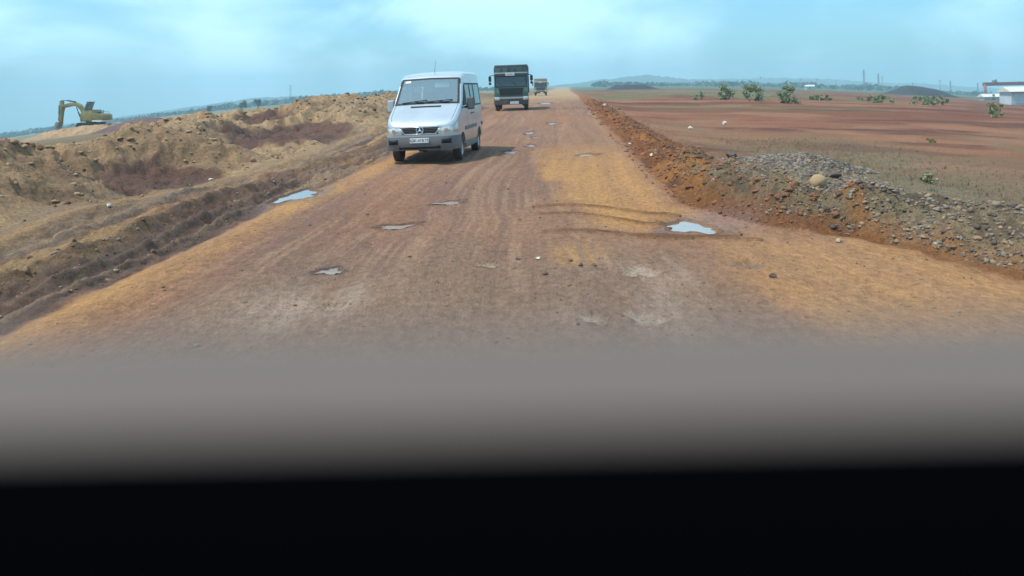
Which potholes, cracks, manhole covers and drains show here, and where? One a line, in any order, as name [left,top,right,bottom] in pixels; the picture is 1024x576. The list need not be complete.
pothole [369,221,427,231]
pothole [308,265,349,276]
pothole [471,260,502,269]
pothole [618,308,675,329]
pothole [575,308,611,327]
pothole [617,261,666,279]
